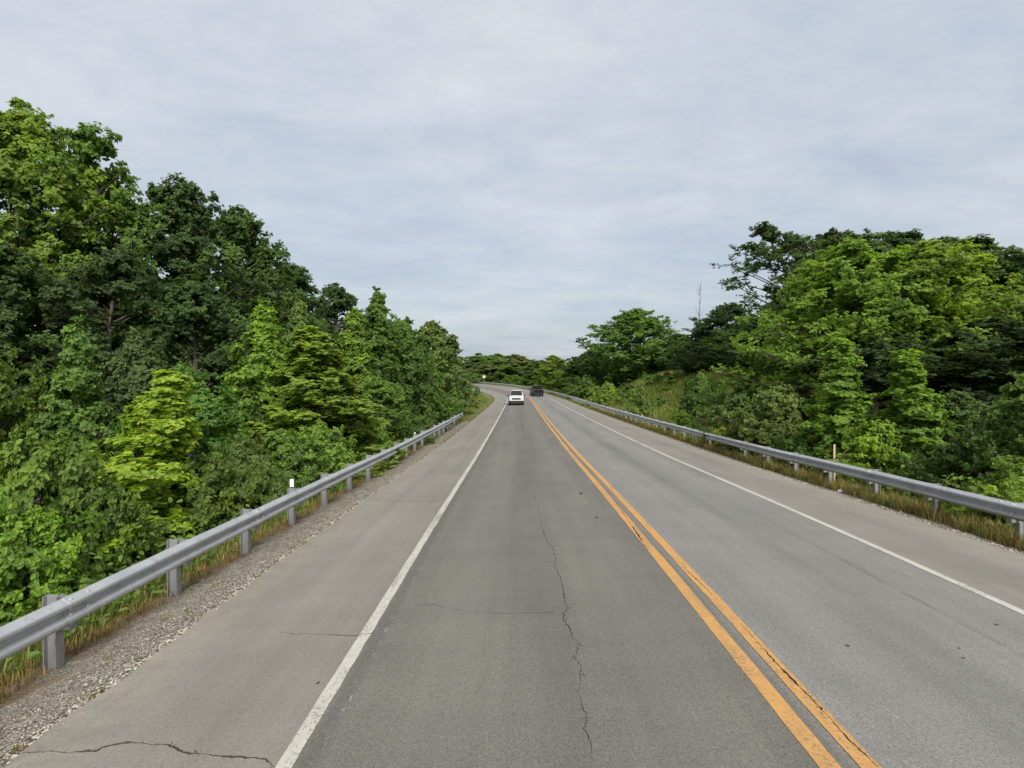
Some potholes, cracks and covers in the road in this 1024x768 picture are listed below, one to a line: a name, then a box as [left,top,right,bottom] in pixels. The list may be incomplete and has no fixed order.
crack [420,495,594,759]
crack [11,741,275,768]
